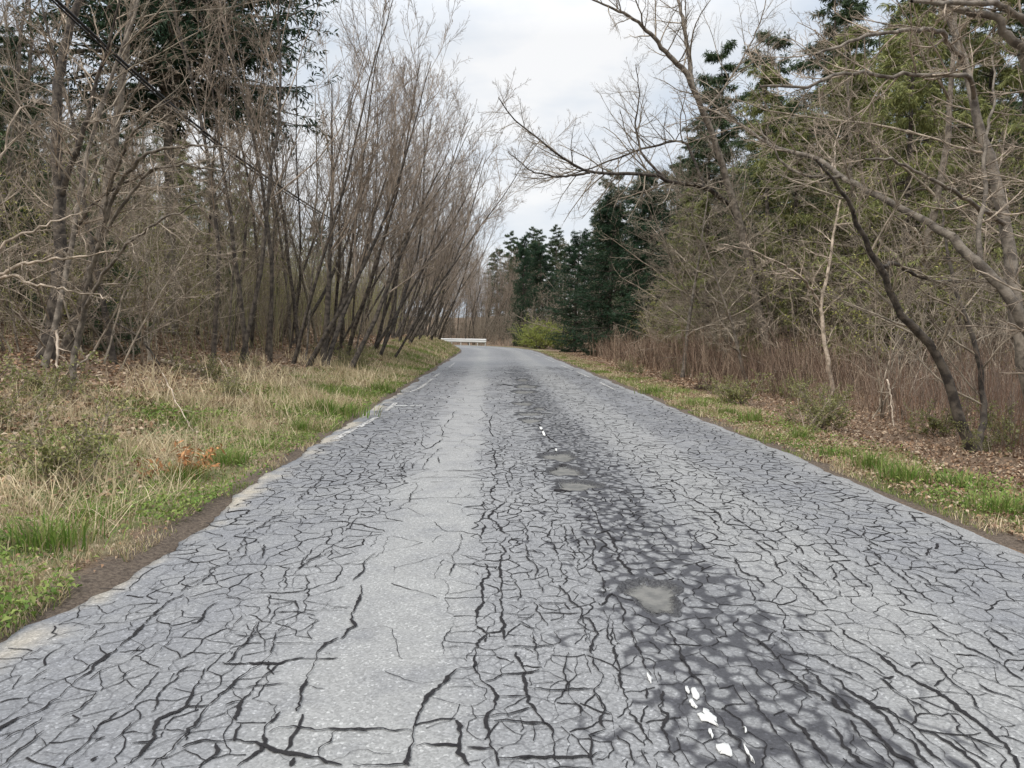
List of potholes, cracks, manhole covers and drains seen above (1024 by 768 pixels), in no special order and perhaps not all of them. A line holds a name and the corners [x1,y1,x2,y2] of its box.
crack [0,366,1024,768]
pothole [545,463,588,477]
pothole [534,451,581,463]
pothole [551,479,607,491]
pothole [616,576,684,618]
